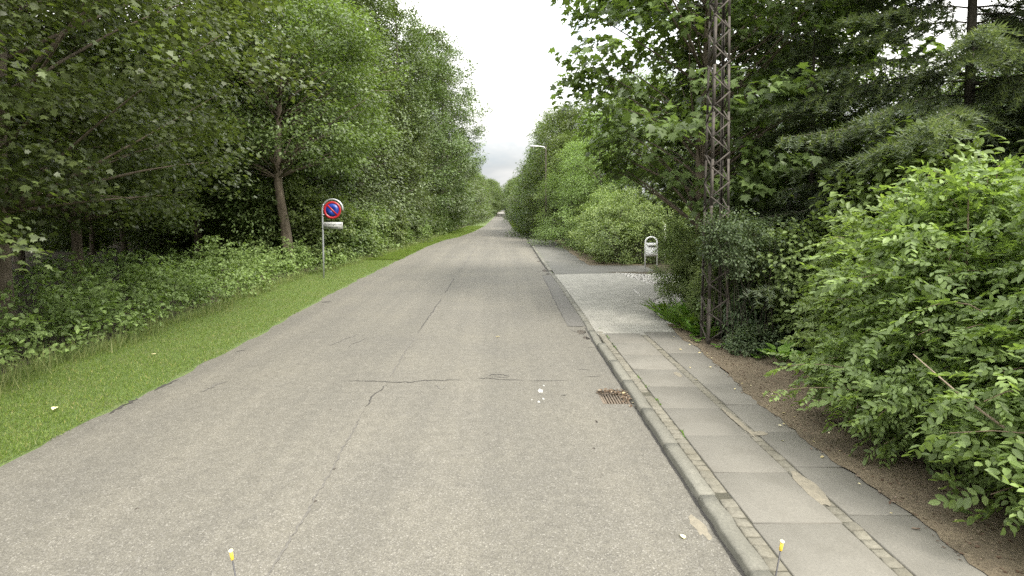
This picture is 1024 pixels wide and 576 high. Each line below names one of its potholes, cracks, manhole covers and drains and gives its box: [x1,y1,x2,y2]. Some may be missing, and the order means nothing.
drain grate [598,392,632,404]
